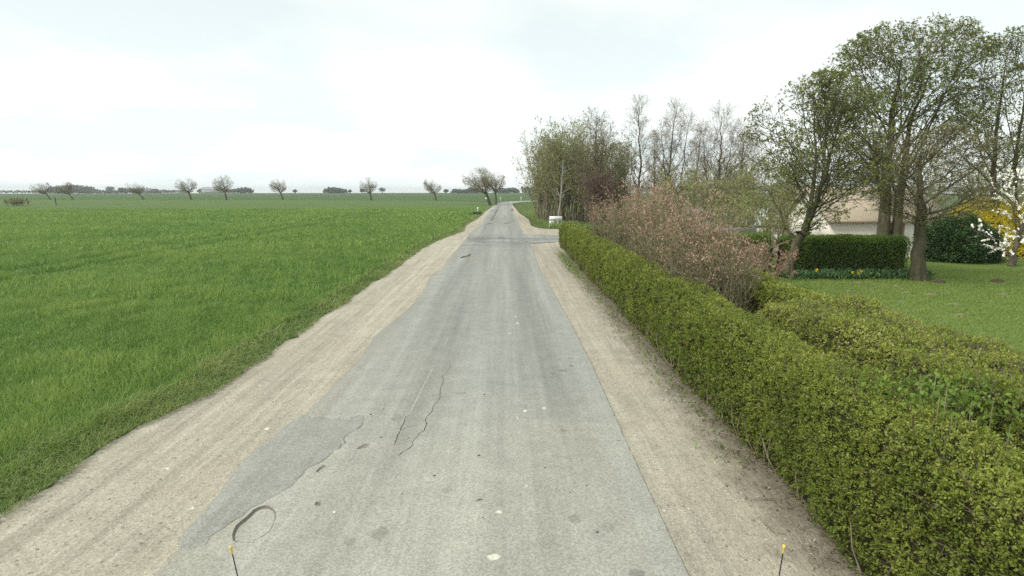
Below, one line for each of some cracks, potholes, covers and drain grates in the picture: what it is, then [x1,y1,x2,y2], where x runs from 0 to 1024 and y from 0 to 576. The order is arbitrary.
crack [394,367,450,454]
